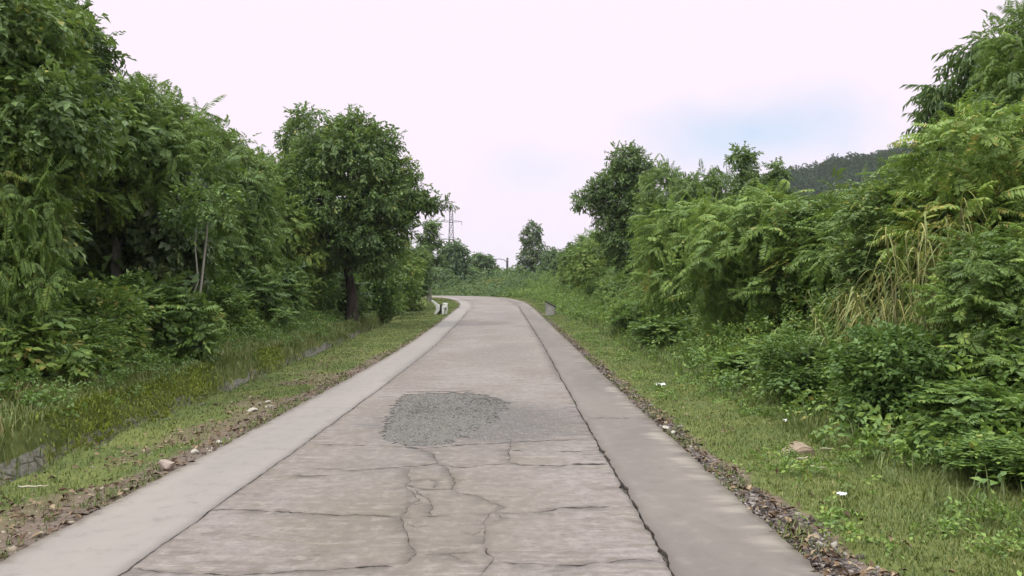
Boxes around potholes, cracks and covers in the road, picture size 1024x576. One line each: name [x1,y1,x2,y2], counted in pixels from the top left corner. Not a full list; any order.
crack [220,440,606,570]
